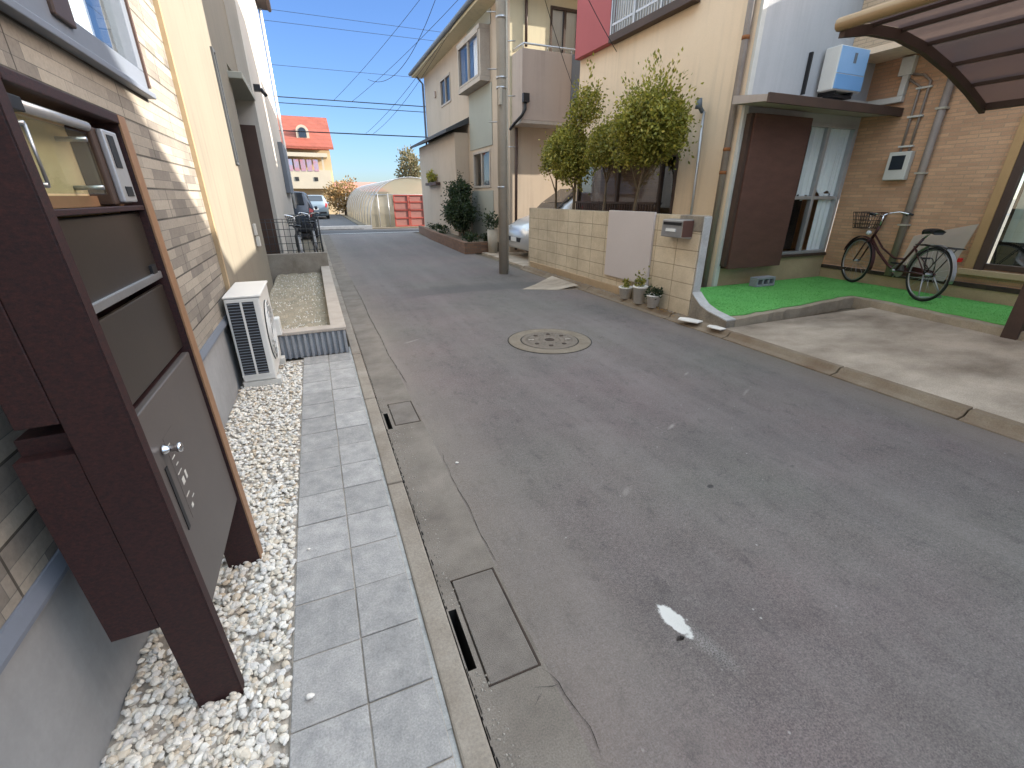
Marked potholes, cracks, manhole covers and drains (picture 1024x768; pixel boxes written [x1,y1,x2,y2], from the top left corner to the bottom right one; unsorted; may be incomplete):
manhole cover [508,329,592,354]
crack [442,453,496,560]
crack [535,673,600,752]
